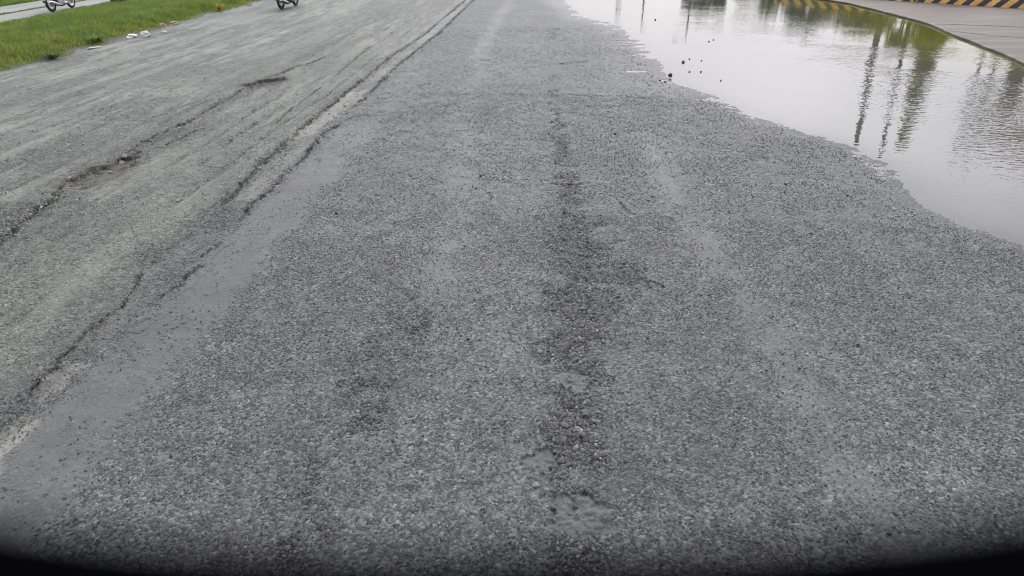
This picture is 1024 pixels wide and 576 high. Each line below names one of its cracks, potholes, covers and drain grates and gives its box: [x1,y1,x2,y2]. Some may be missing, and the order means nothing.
pothole [528,473,629,553]
